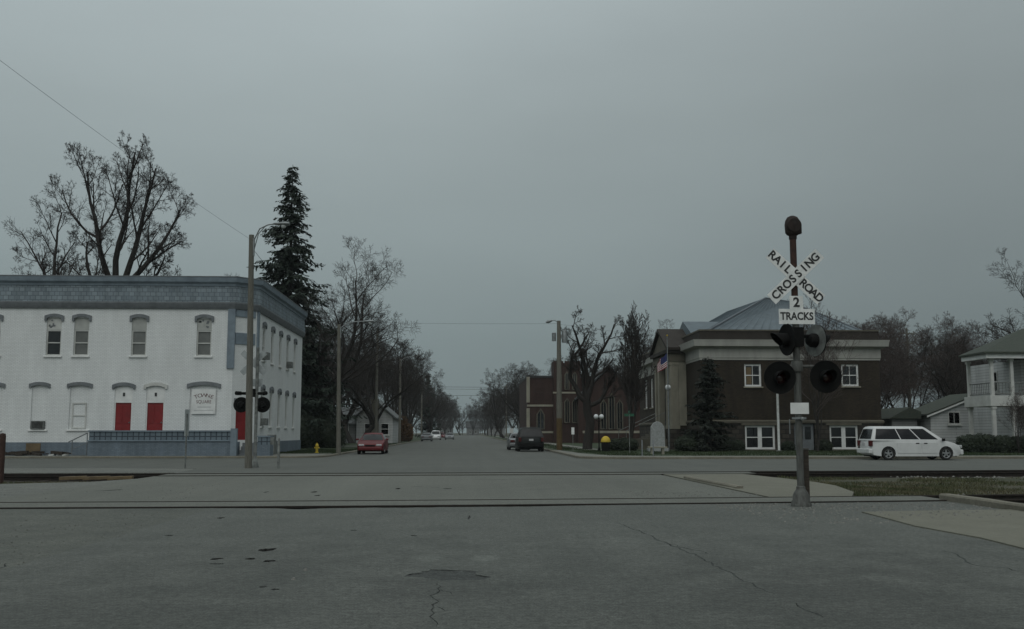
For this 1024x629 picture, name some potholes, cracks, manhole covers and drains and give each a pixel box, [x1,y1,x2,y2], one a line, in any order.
crack [619,523,771,593]
crack [429,584,452,624]
pothole [405,569,490,581]
crack [945,551,1023,573]
